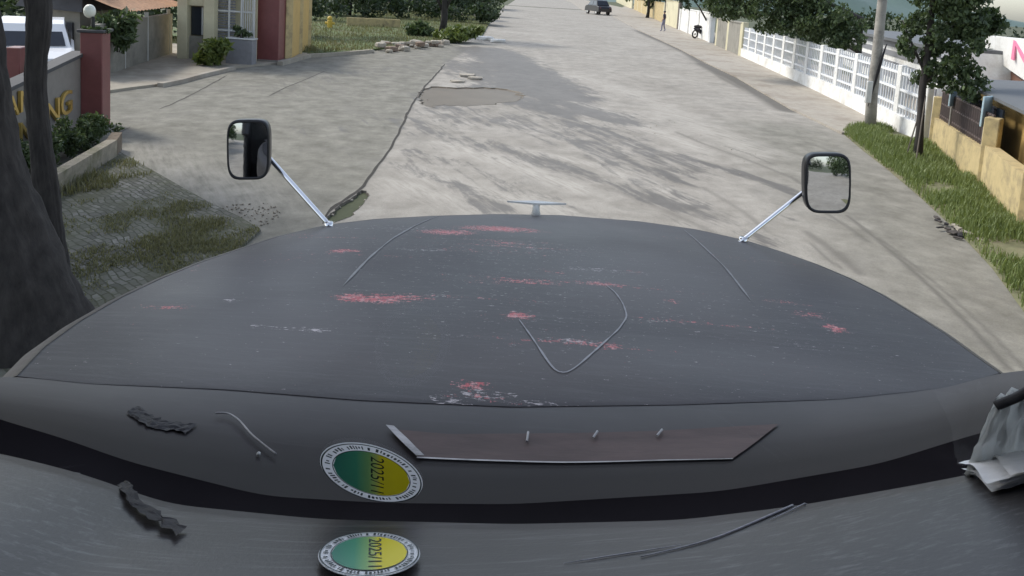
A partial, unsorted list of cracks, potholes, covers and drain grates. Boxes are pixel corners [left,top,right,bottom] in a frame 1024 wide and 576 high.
pothole [327,190,369,223]
pothole [418,86,526,108]
crack [322,64,445,224]
